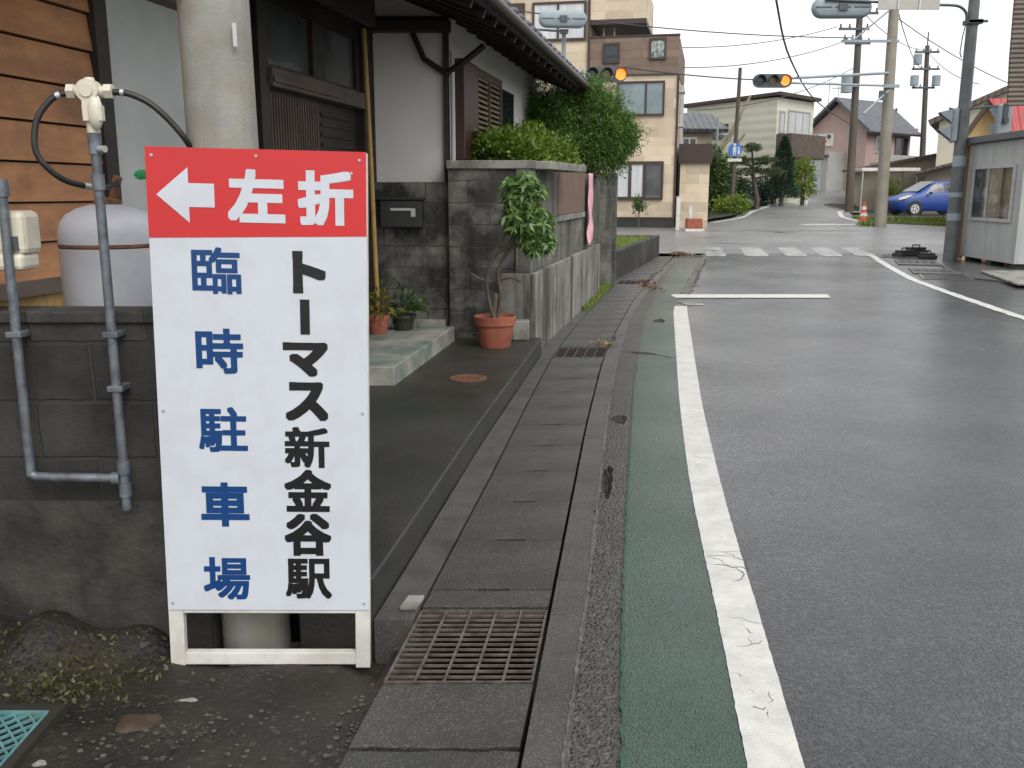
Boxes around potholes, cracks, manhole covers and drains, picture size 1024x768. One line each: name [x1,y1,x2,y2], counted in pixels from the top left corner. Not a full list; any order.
drain grate [0,704,68,768]
crack [709,549,758,581]
drain grate [554,348,608,358]
pothole [608,413,631,427]
pothole [600,459,617,506]
drain grate [384,610,548,692]
manhole cover [449,374,487,382]
